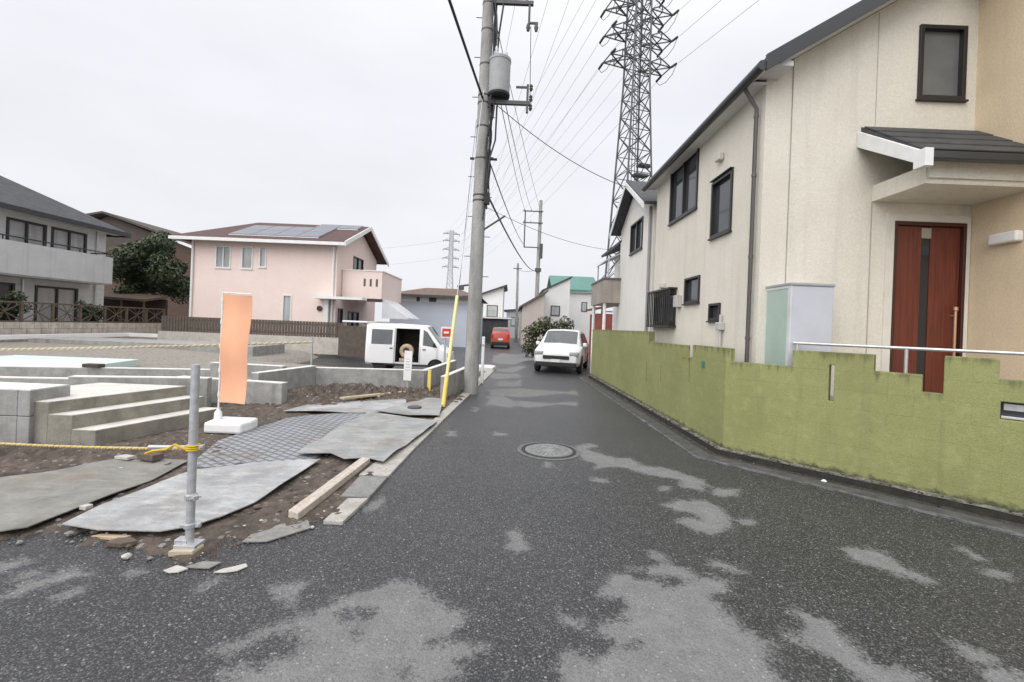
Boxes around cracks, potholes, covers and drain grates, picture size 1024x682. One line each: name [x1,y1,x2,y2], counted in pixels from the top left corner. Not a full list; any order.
manhole cover [517,442,581,460]
